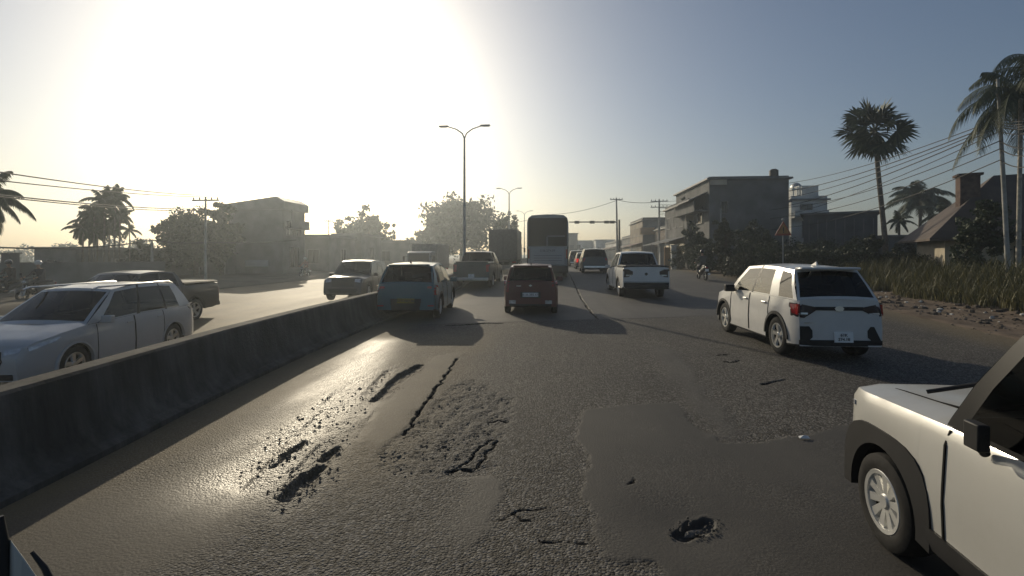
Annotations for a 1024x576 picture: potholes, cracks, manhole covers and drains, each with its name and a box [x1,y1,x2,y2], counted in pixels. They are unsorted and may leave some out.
crack [492,505,597,551]
crack [715,354,791,386]
crack [397,358,512,476]
pothole [364,363,428,404]
pothole [266,461,336,507]
pothole [663,514,727,548]
pothole [311,443,348,465]
pothole [264,439,312,471]
